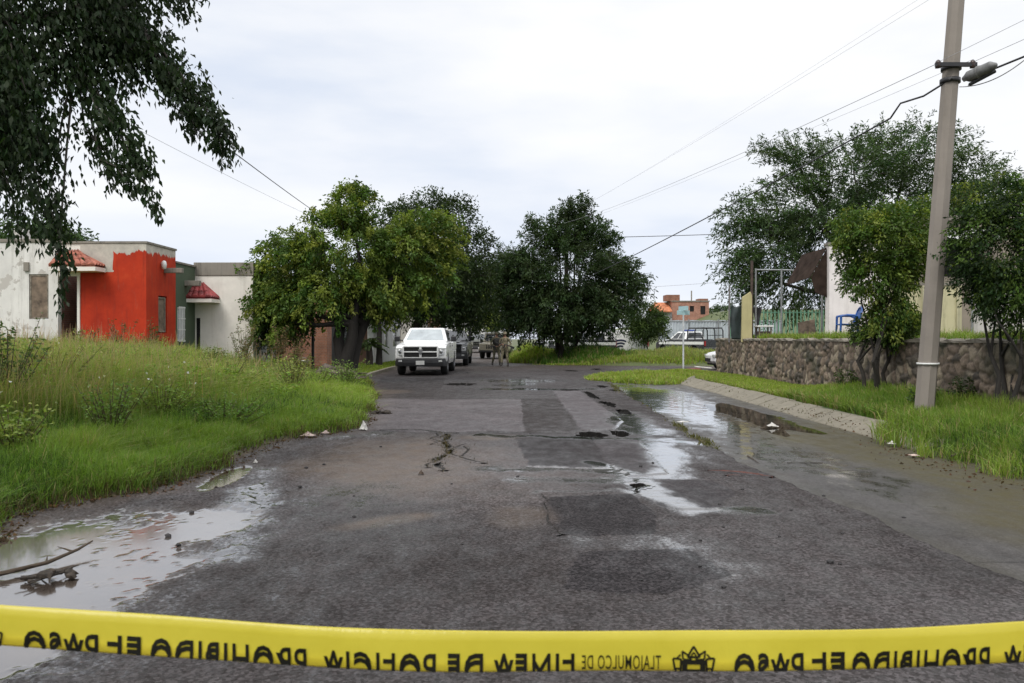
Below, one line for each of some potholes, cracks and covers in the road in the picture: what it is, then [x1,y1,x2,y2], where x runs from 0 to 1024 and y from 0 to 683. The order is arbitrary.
crack [535,493,568,536]
pothole [622,481,656,491]
pothole [605,428,634,439]
crack [381,429,487,471]
pothole [581,390,605,402]
